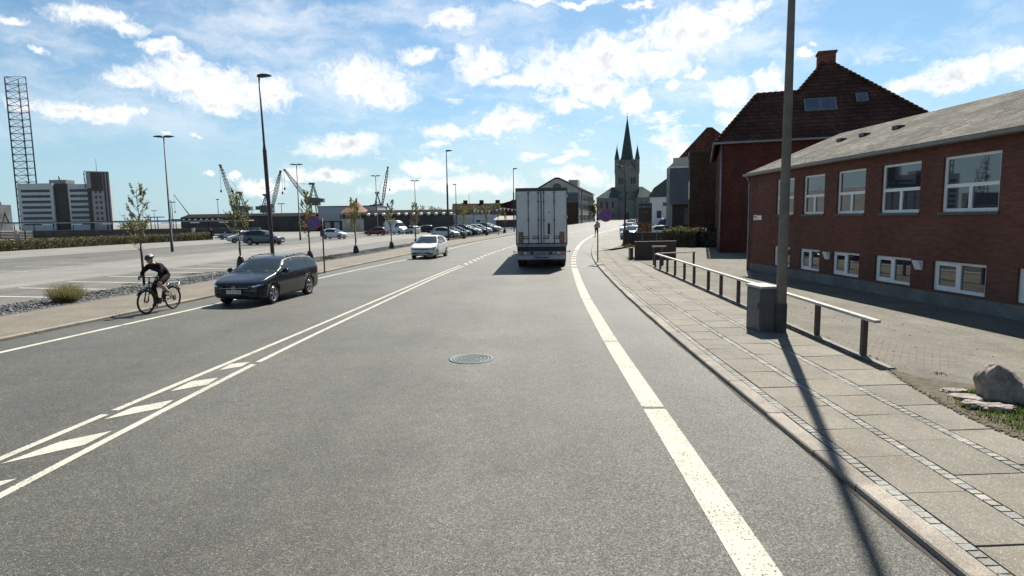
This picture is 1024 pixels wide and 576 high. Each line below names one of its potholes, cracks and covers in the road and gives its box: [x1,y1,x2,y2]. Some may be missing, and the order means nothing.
manhole cover [449,354,493,364]
